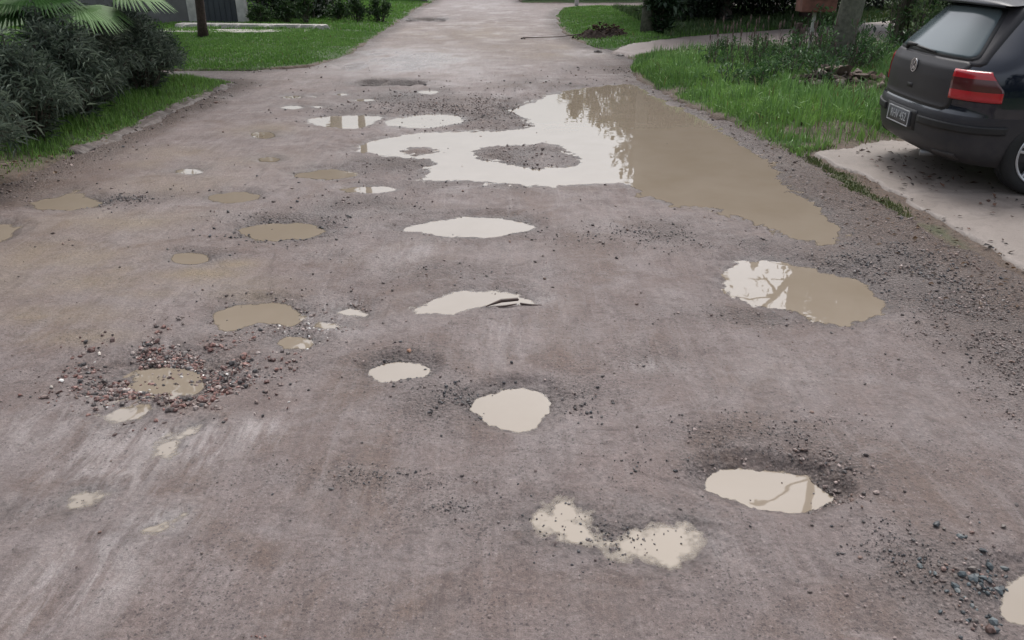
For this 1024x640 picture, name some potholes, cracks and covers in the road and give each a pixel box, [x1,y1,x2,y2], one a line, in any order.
pothole [304,79,922,261]
pothole [167,273,407,370]
pothole [0,314,325,437]
pothole [687,244,941,335]
pothole [677,427,880,527]
